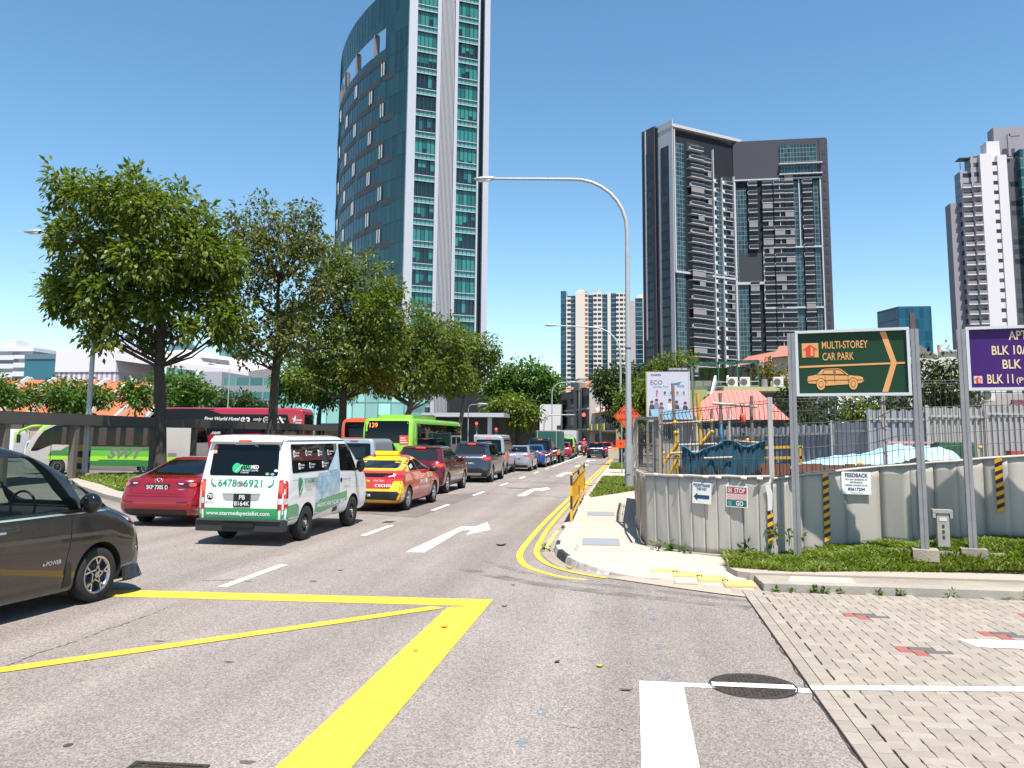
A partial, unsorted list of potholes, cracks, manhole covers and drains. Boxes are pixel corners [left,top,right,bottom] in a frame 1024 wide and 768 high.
crack [8,607,167,666]
utility cover [582,538,621,546]
manhole cover [708,673,798,700]
drain grate [127,760,210,768]
